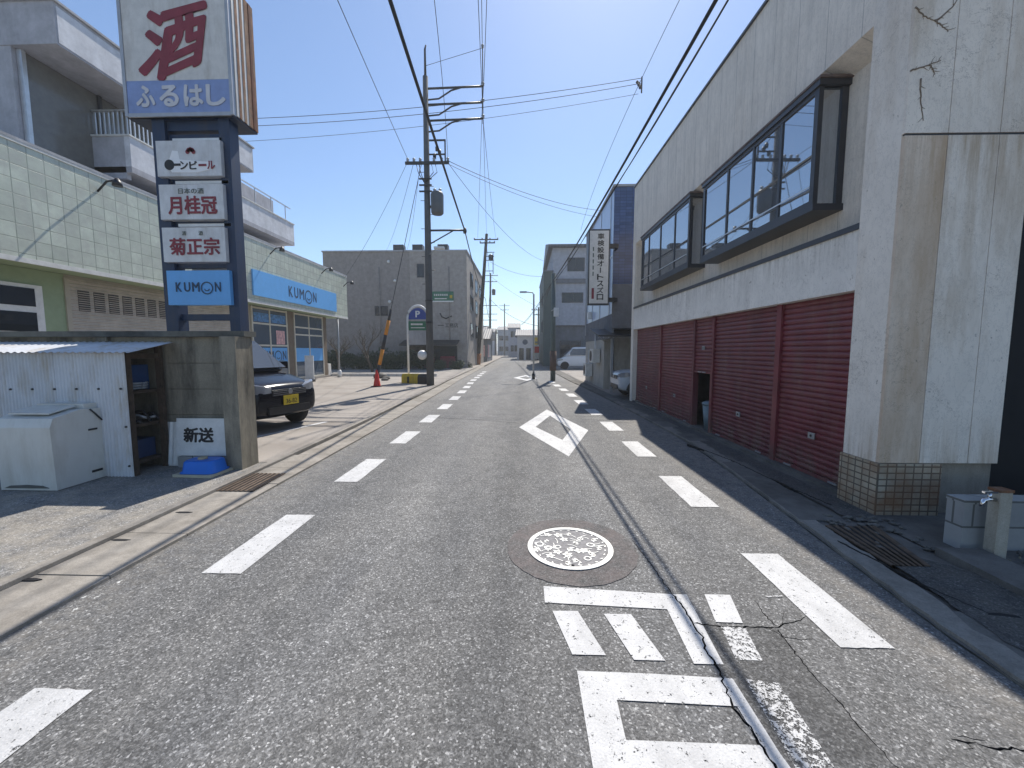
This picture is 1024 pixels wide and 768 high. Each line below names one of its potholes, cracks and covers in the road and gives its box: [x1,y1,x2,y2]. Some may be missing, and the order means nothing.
crack [633,541,899,768]
crack [687,444,832,505]
crack [837,540,988,613]
drain grate [825,525,930,569]
crack [952,735,1024,752]
drain grate [216,473,286,492]
manhole cover [507,519,639,587]
